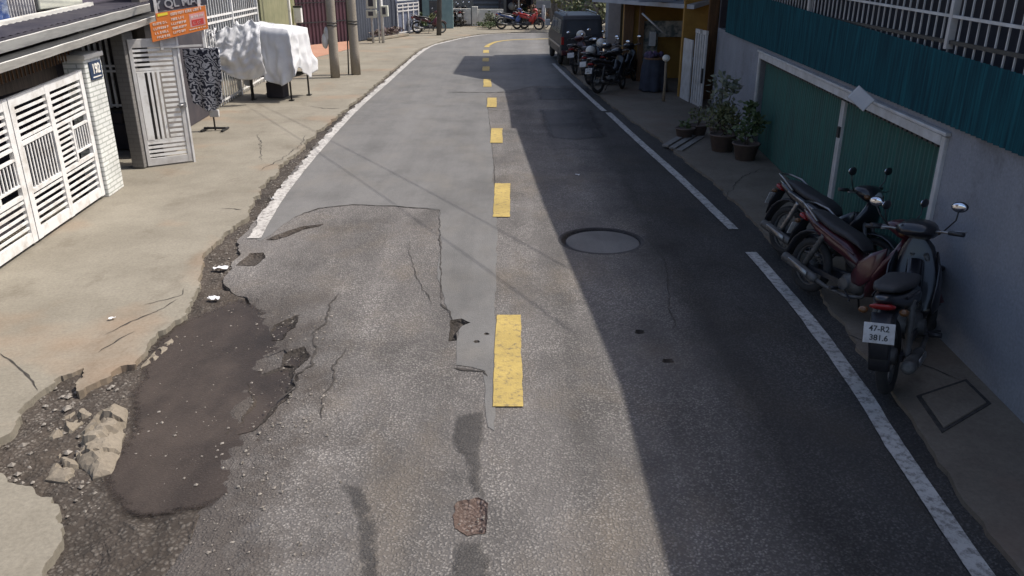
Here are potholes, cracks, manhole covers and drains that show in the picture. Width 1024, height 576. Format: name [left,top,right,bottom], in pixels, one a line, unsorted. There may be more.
crack [100,291,184,351]
pothole [237,252,265,266]
manhole cover [558,227,644,255]
crack [270,295,346,419]
crack [648,239,676,329]
pothole [449,318,470,341]
crack [409,245,453,320]
